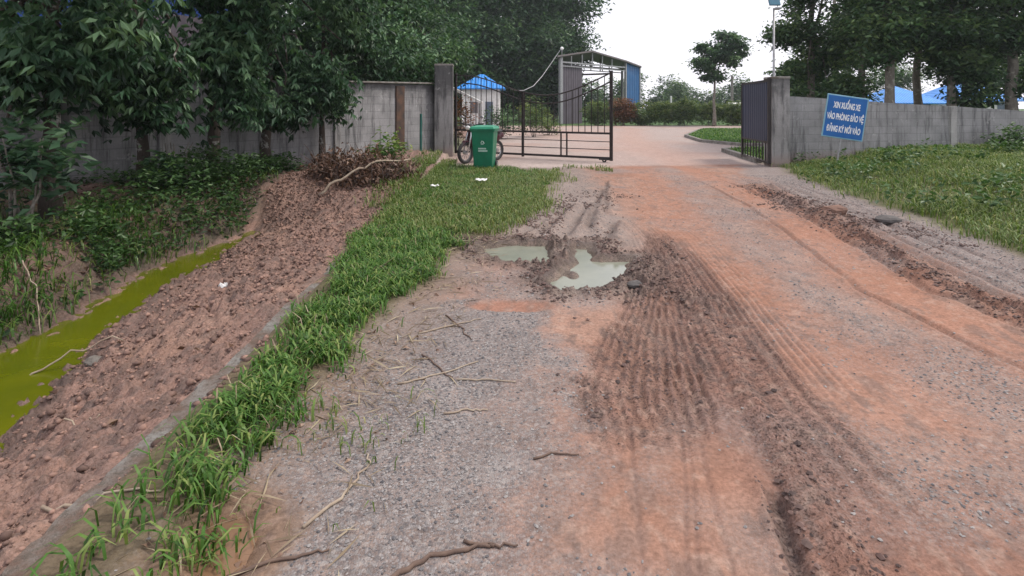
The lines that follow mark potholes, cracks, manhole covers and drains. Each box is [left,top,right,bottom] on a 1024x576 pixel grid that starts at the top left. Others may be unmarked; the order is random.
pothole [475,237,558,262]
pothole [533,240,636,290]
